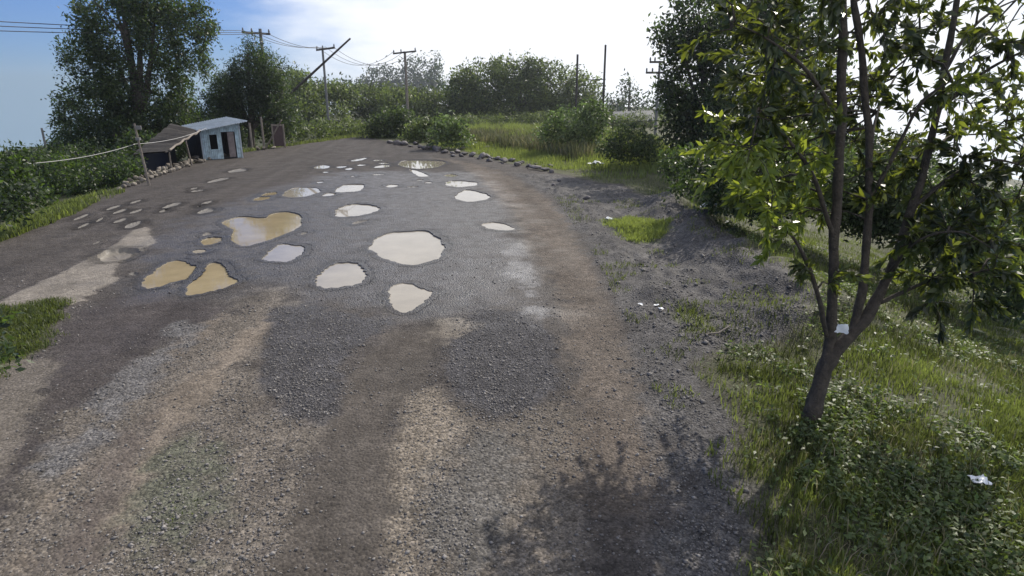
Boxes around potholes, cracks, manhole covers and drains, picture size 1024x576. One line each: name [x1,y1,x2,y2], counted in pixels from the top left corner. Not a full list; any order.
pothole [192,235,232,247]
pothole [393,159,452,169]
pothole [176,260,247,298]
pothole [306,260,375,291]
pothole [327,202,387,218]
pothole [361,229,453,267]
pothole [475,221,522,232]
pothole [380,281,440,315]
pothole [276,186,327,199]
pothole [448,189,497,203]
pothole [214,210,309,248]
pothole [253,242,312,264]
